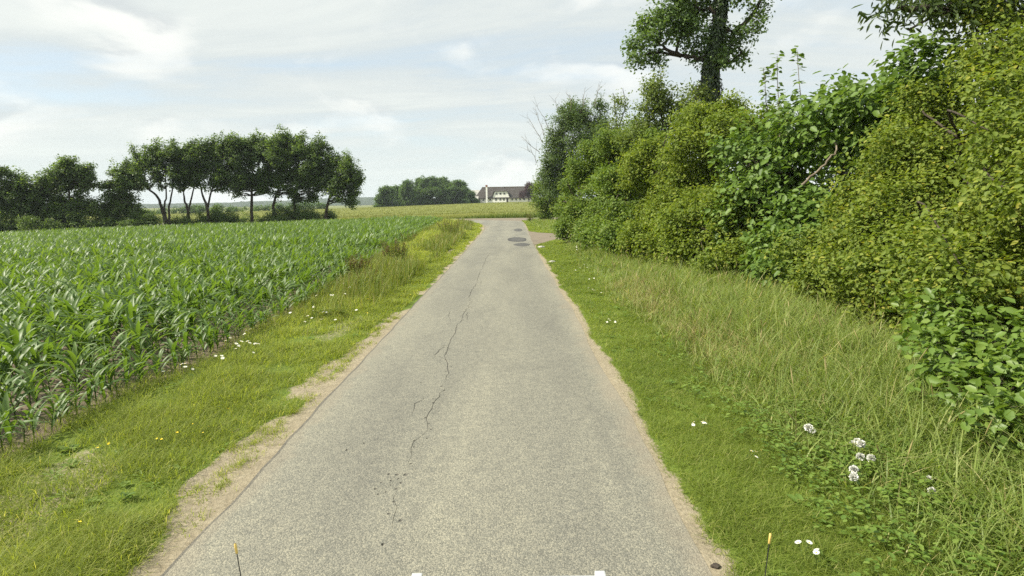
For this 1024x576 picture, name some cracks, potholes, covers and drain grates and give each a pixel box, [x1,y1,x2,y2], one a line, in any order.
crack [374,253,490,537]
